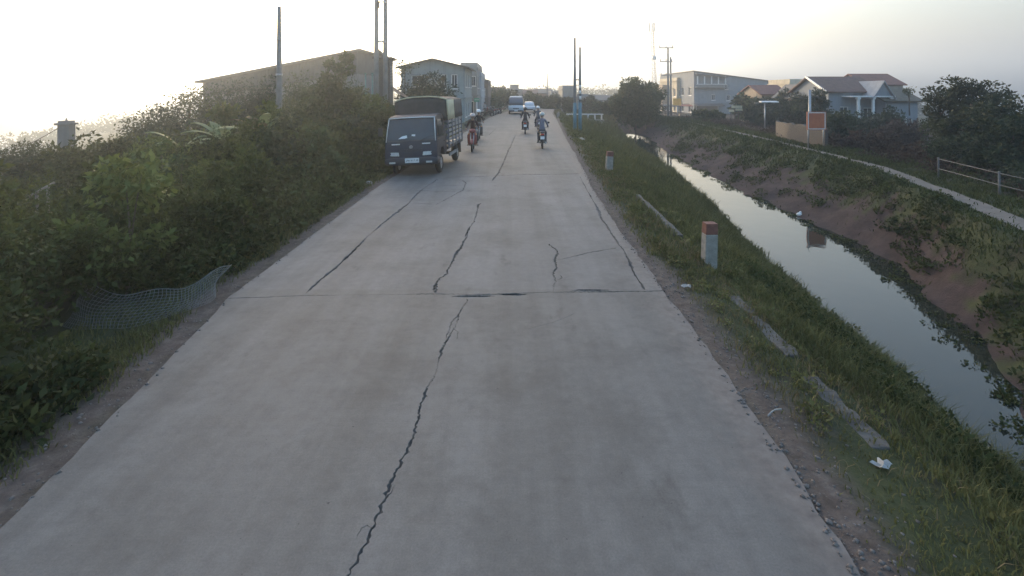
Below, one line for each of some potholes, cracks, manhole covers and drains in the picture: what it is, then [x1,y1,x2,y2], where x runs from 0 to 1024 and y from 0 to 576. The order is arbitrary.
crack [306,179,481,576]
crack [548,177,645,291]
